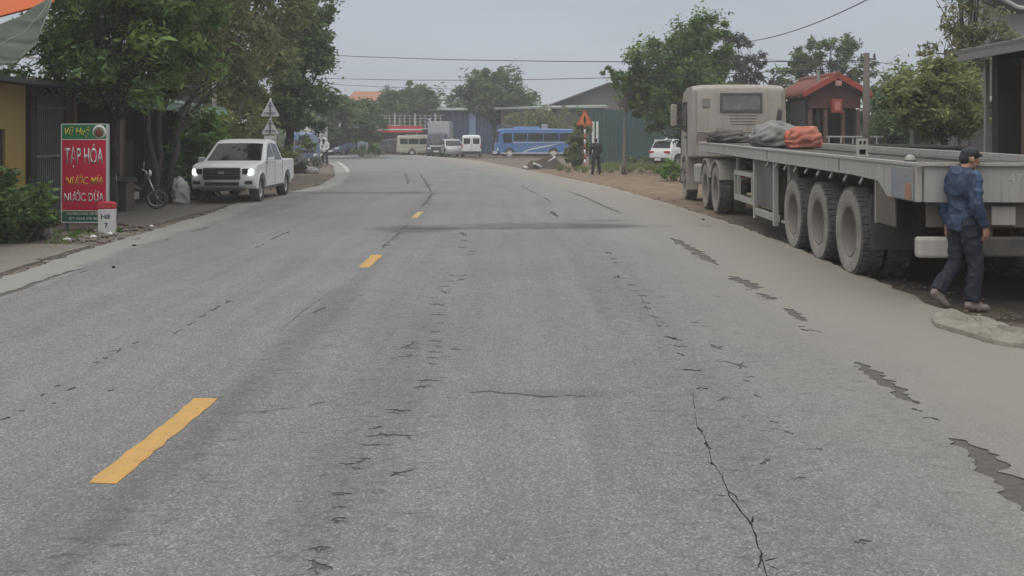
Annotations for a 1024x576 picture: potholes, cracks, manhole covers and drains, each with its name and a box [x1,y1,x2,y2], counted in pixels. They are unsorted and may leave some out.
crack [306,232,475,576]
crack [471,390,585,398]
crack [381,173,433,250]
crack [0,301,232,421]
crack [606,252,871,576]
